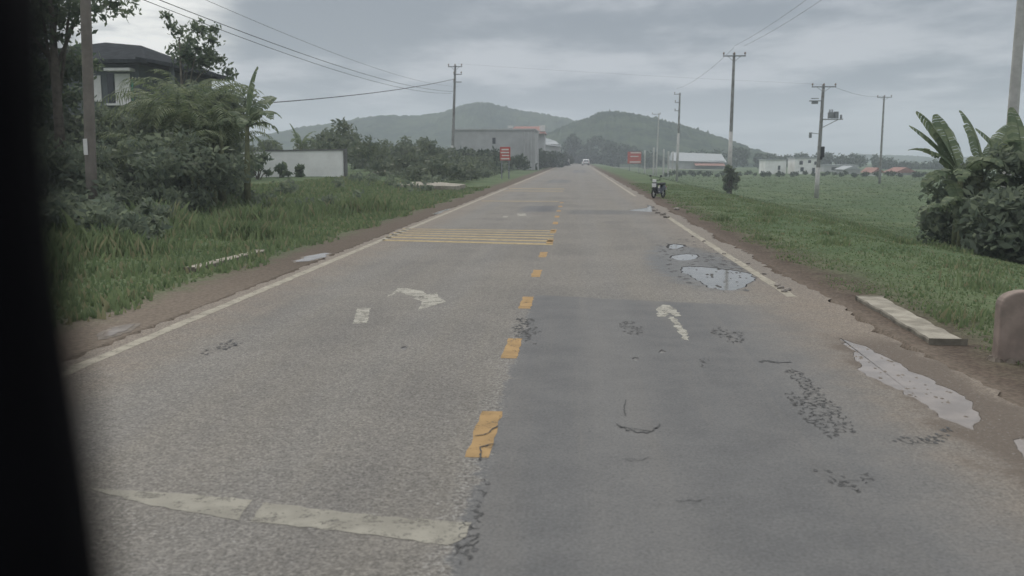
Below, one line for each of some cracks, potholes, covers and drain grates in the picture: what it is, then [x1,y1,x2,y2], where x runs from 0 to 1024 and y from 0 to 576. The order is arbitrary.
crack [200,339,243,355]
crack [475,425,498,460]
crack [619,321,643,334]
crack [617,400,660,433]
crack [511,318,541,344]
pothole [680,266,756,290]
crack [813,469,875,492]
crack [893,426,952,444]
crack [454,479,490,564]
crack [711,327,744,343]
crack [758,360,856,438]
